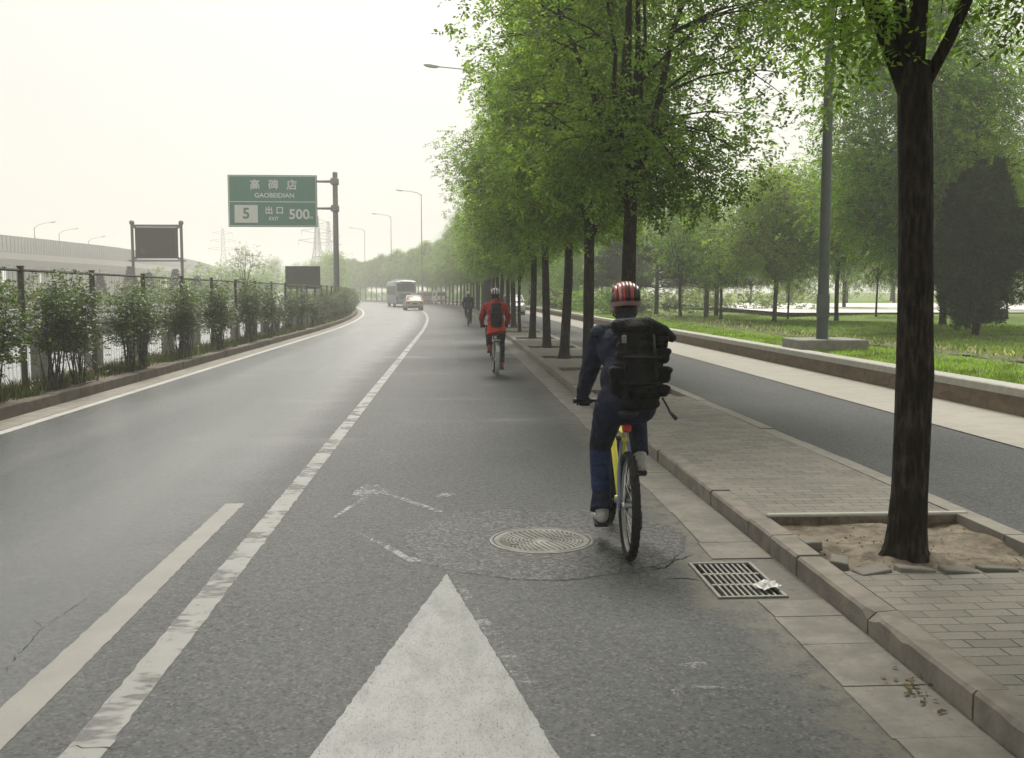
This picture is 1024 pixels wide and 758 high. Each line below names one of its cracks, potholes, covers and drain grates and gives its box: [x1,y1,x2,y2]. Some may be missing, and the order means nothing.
crack [631,555,700,581]
manhole cover [489,527,594,554]
drain grate [688,561,789,599]
